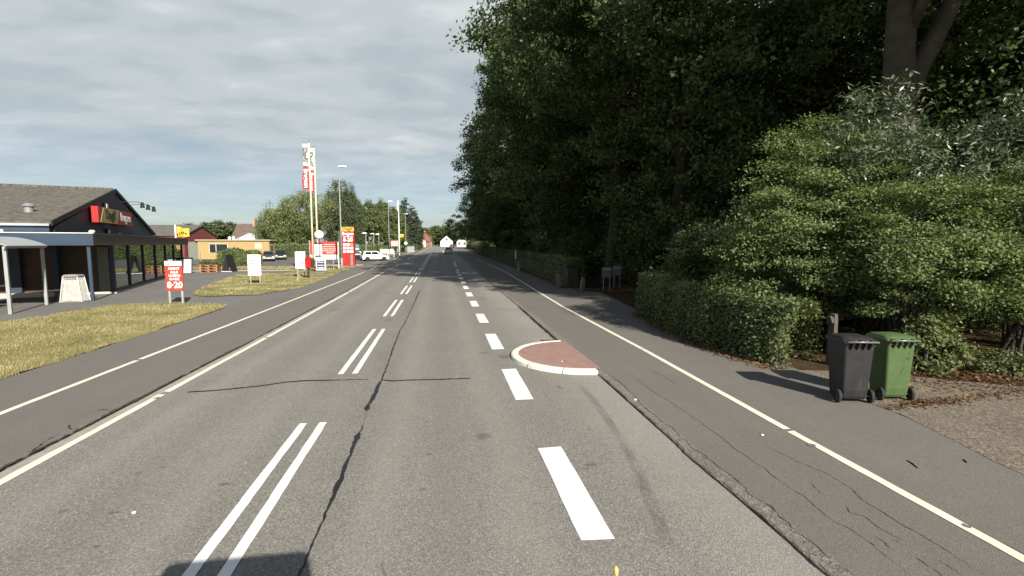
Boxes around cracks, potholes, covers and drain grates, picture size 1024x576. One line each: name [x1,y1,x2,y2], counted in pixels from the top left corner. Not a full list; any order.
crack [606,372,975,575]
